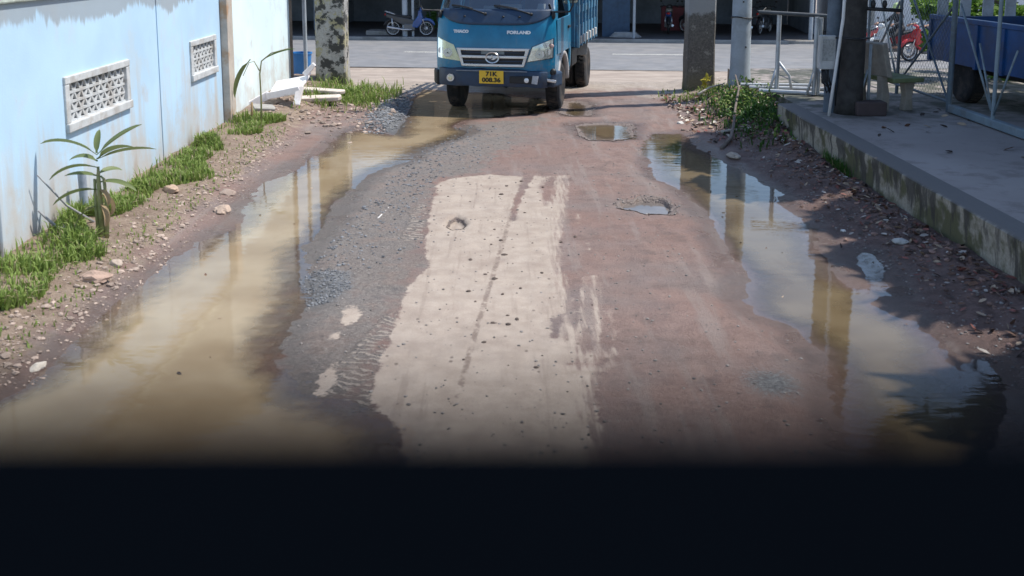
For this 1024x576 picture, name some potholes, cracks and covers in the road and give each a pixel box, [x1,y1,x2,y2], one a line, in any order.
pothole [613,194,681,215]
pothole [573,122,637,141]
